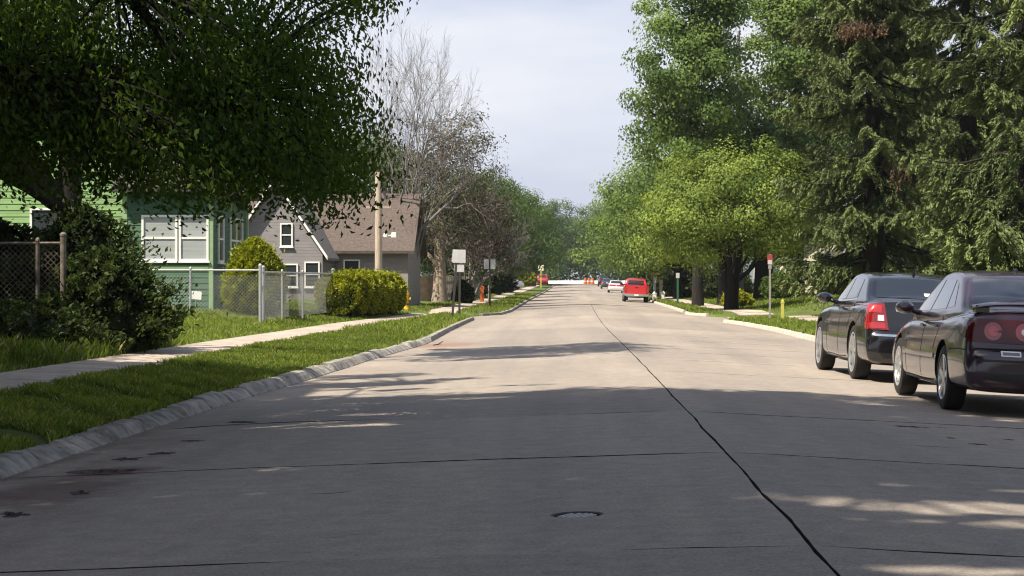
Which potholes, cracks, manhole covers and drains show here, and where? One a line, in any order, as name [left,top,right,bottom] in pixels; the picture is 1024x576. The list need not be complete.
crack [24,305,1024,576]
